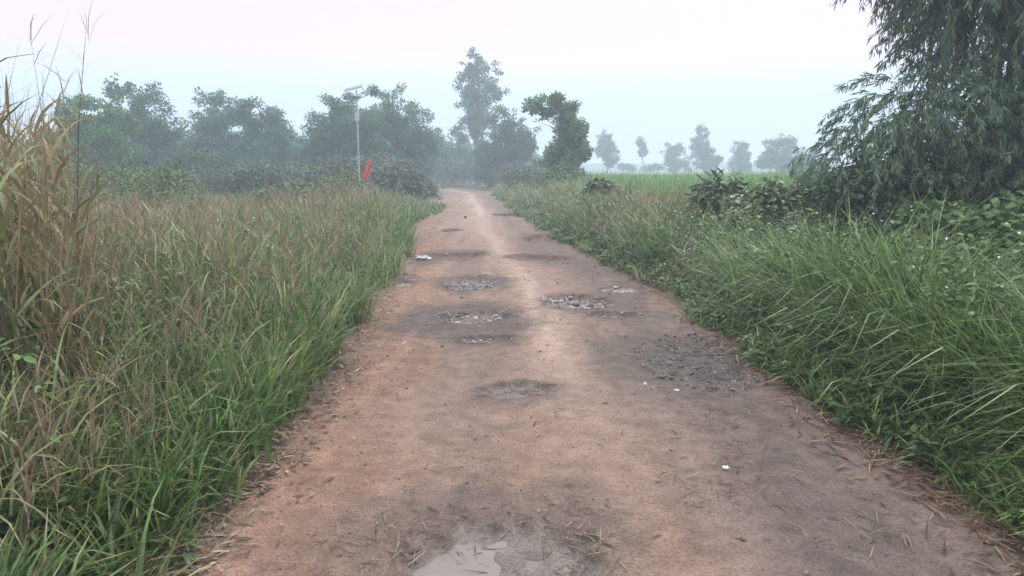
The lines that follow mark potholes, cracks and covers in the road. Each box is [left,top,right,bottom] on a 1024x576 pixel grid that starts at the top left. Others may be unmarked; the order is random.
pothole [438,276,500,292]
pothole [584,310,645,319]
pothole [424,251,490,259]
pothole [496,253,577,261]
pothole [444,334,518,345]
pothole [432,309,521,325]
pothole [539,293,623,310]
pothole [521,233,556,242]
pothole [471,378,556,400]
pothole [596,285,643,294]
pothole [630,332,774,391]
pothole [388,510,624,576]
